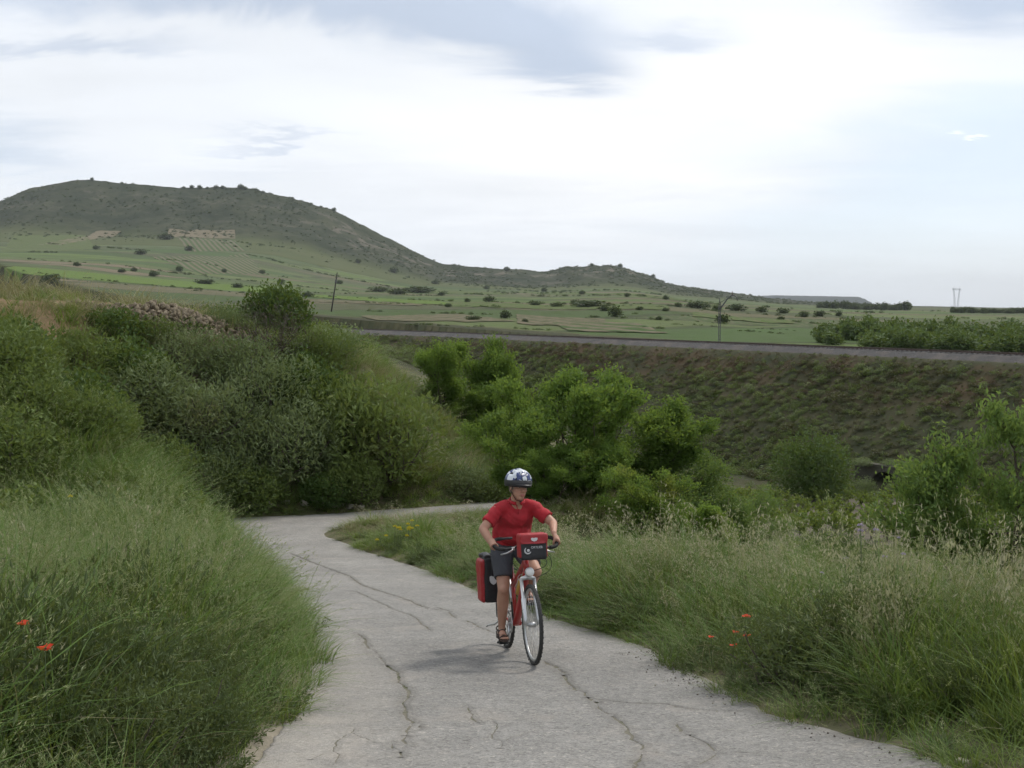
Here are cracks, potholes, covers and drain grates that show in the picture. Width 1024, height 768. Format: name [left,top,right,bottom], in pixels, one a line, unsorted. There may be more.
crack [464,660,756,768]
crack [289,553,496,765]
